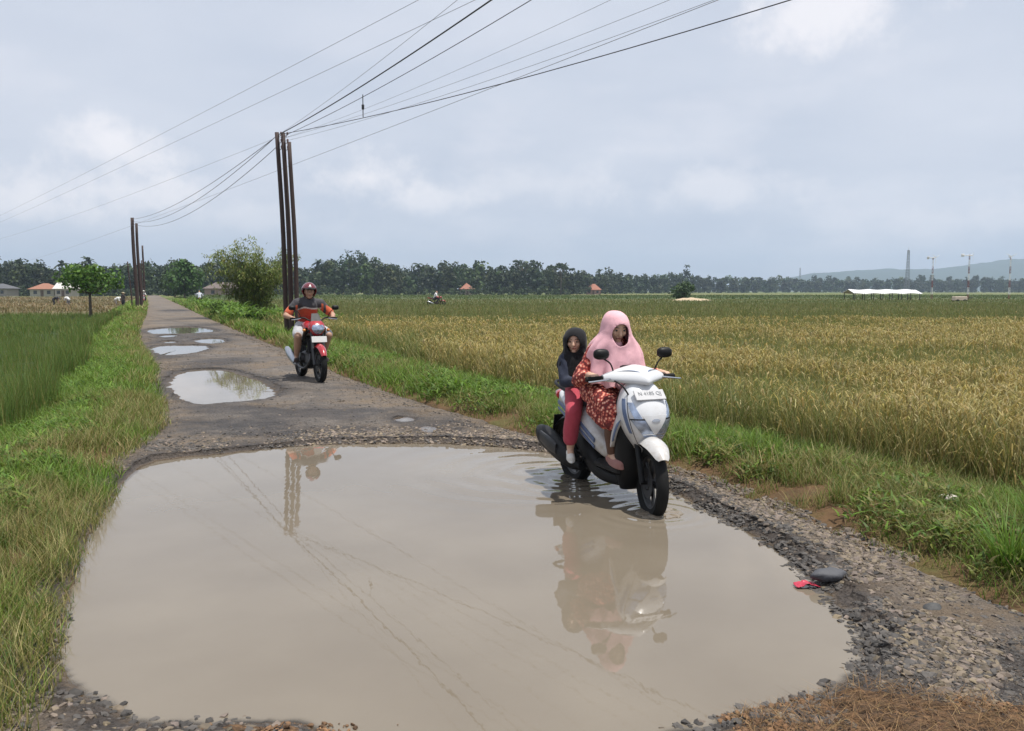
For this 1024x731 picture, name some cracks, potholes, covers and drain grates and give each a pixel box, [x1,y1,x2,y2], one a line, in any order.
pothole [143,326,221,334]
pothole [24,435,895,731]
pothole [146,344,213,355]
pothole [157,368,288,404]
